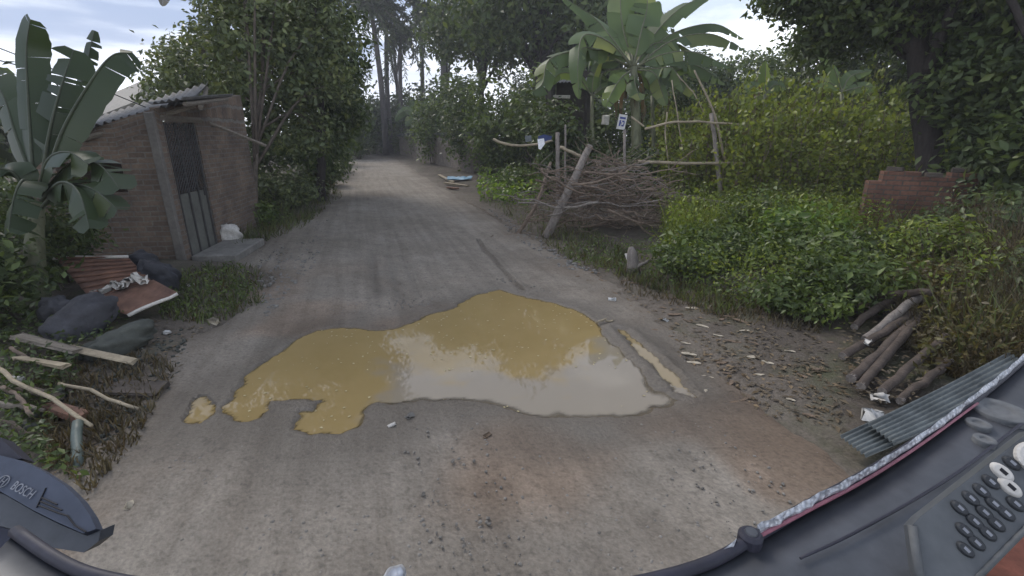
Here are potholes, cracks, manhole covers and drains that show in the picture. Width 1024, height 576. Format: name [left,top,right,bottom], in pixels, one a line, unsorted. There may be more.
pothole [215,288,716,436]
crack [476,239,525,290]
pothole [179,394,218,426]
